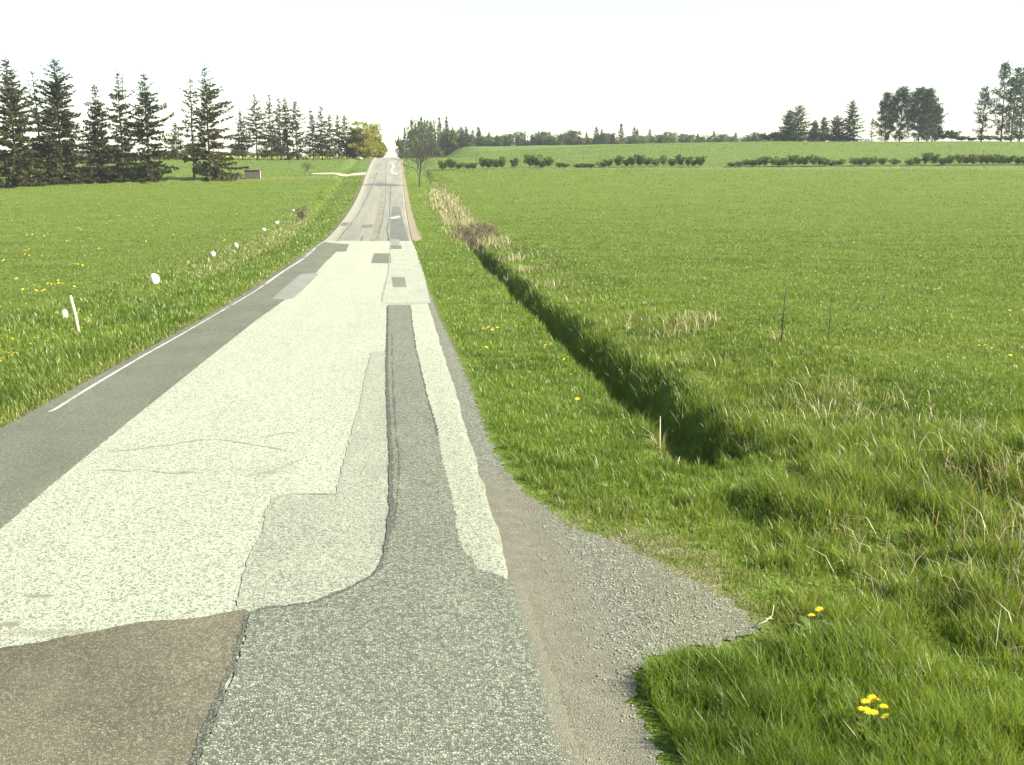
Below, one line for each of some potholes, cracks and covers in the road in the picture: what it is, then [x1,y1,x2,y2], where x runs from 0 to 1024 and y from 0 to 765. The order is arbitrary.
crack [111,352,373,606]
